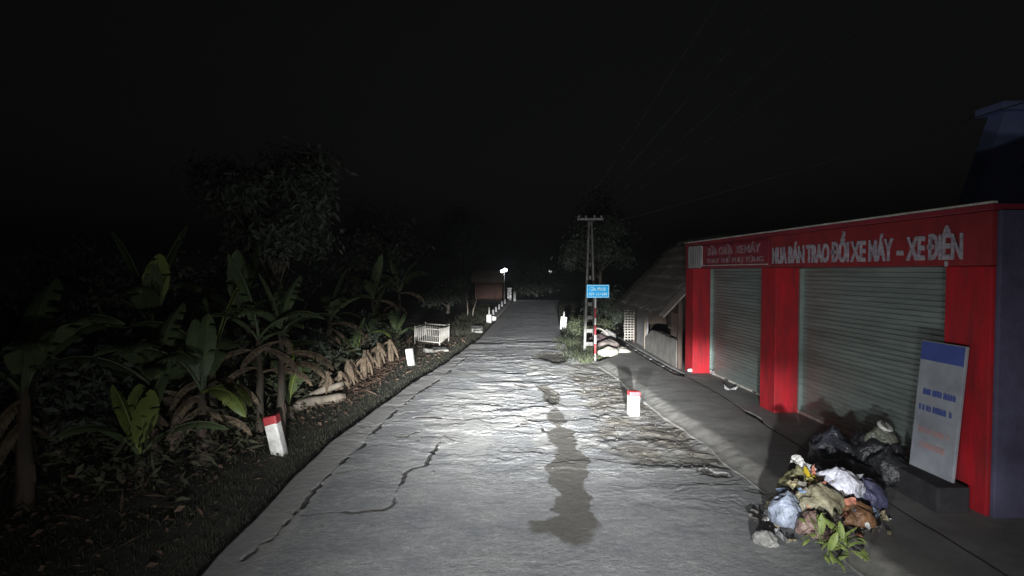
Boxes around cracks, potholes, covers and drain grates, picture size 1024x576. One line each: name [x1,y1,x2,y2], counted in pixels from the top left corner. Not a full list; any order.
crack [299,442,441,516]
pothole [537,385,560,406]
pothole [537,352,569,364]
